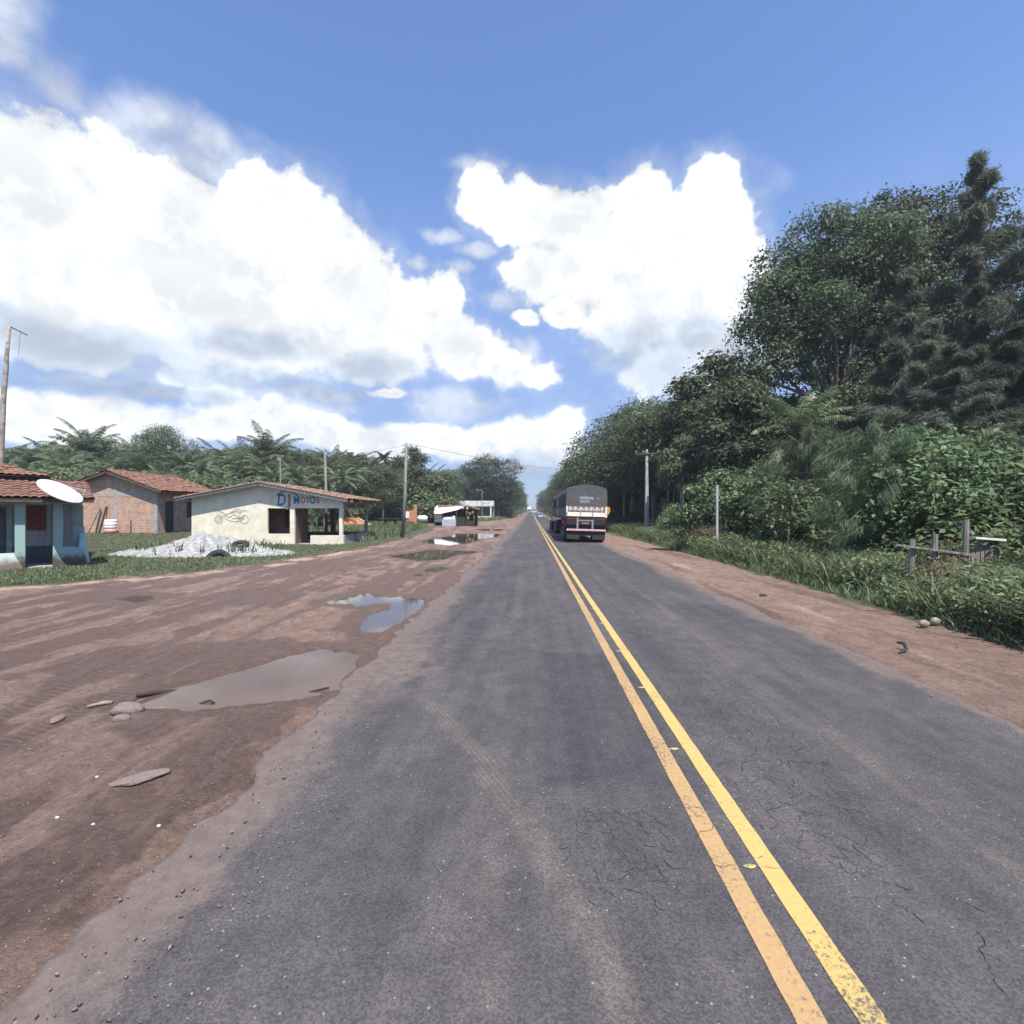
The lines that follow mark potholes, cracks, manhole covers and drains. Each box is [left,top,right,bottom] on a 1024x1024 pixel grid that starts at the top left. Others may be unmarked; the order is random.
crack [557,802,687,913]
crack [633,646,1011,998]
